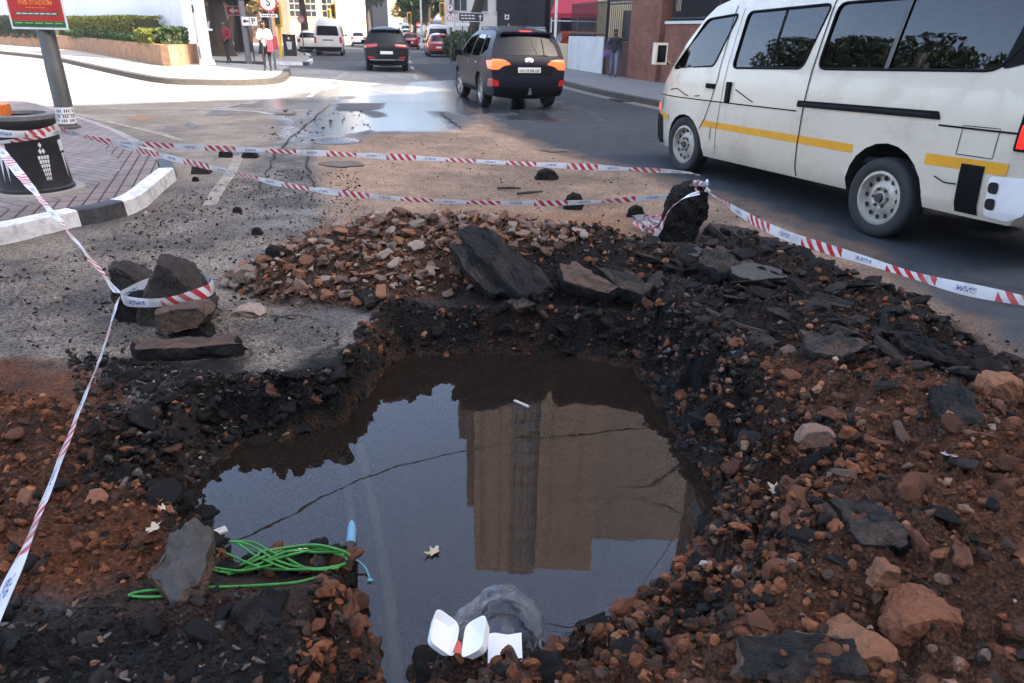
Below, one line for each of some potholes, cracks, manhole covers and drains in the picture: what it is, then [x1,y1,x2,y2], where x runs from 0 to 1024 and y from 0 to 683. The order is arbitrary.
pothole [75,299,858,683]
crack [259,103,331,207]
